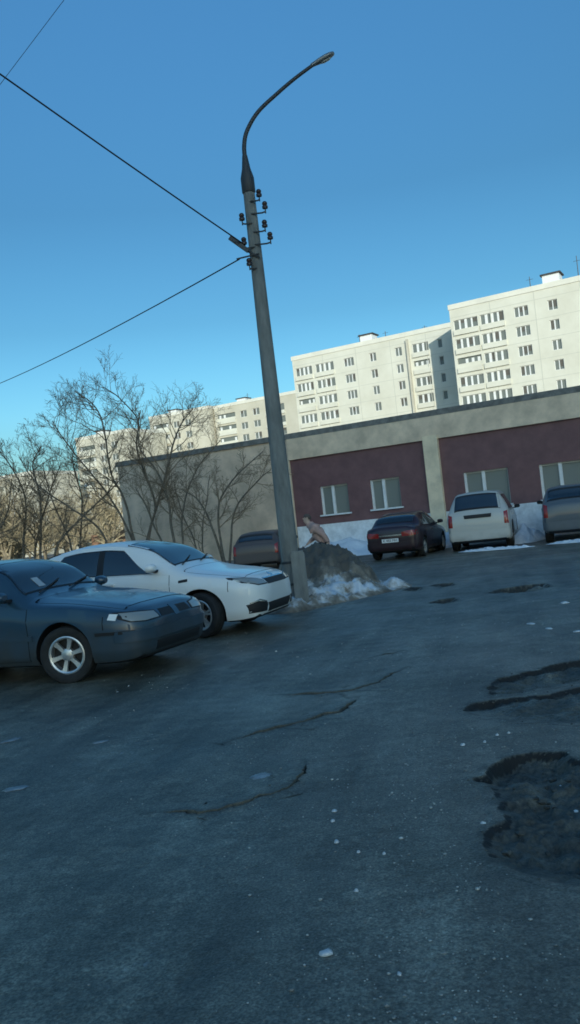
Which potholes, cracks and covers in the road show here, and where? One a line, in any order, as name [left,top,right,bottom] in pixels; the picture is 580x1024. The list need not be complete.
pothole [425,597,463,605]
pothole [484,583,556,595]
pothole [479,659,580,698]
crack [137,650,412,820]
pothole [454,684,580,726]
pothole [460,748,580,894]
